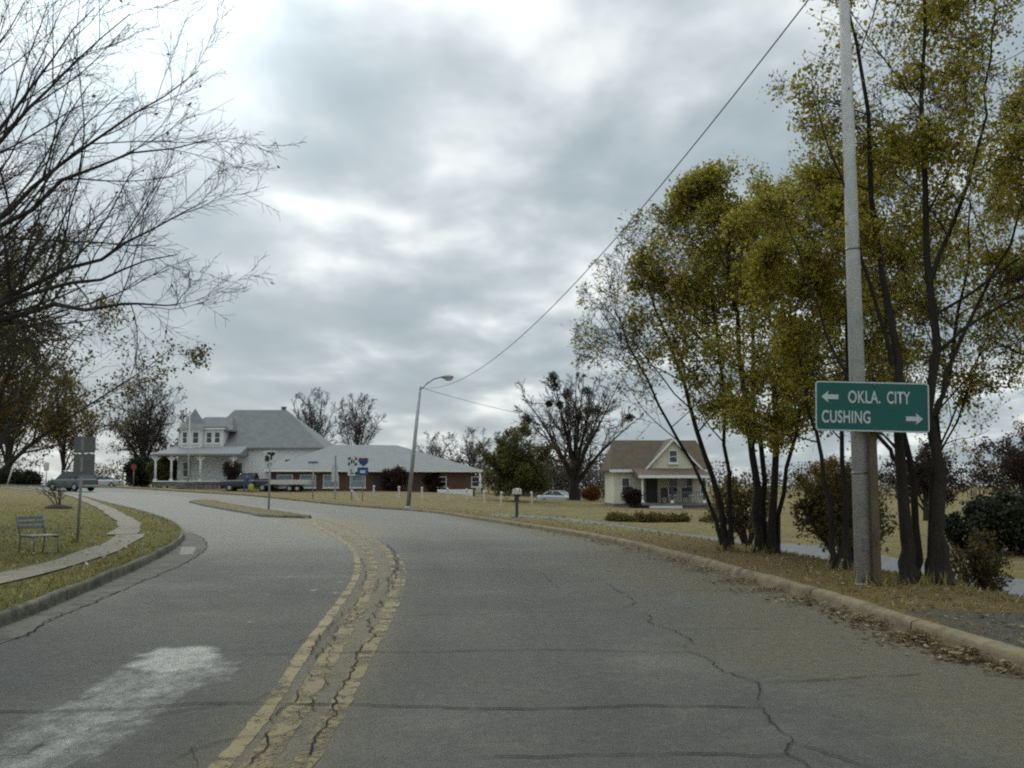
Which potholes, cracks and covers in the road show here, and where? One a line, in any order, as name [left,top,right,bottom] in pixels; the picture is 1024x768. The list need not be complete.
crack [7,539,872,768]
